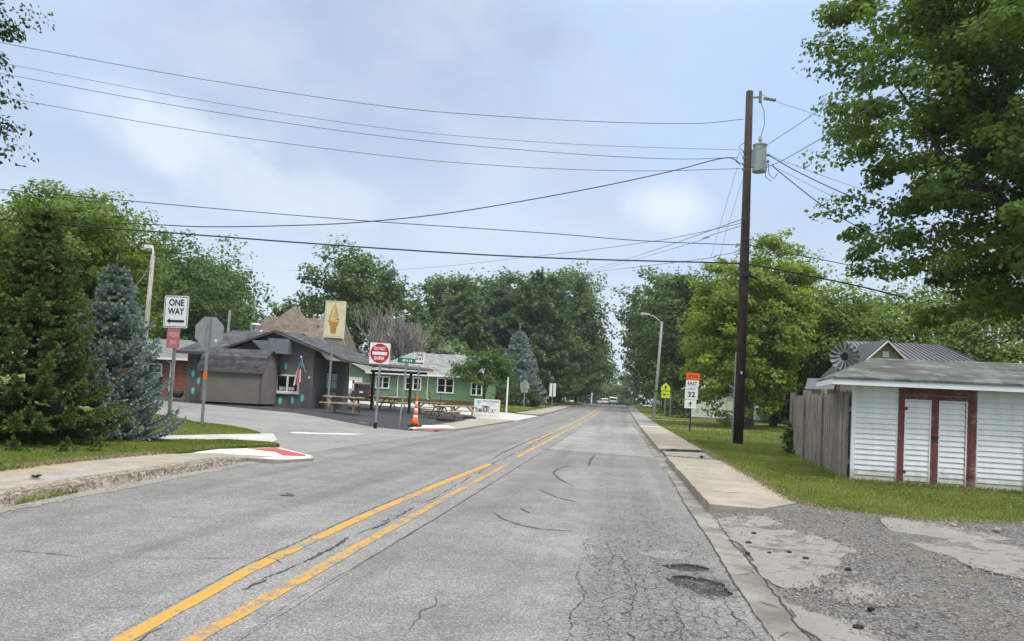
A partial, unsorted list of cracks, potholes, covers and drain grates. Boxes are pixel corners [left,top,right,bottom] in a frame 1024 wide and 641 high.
crack [565,471,844,641]
pothole [666,575,733,597]
